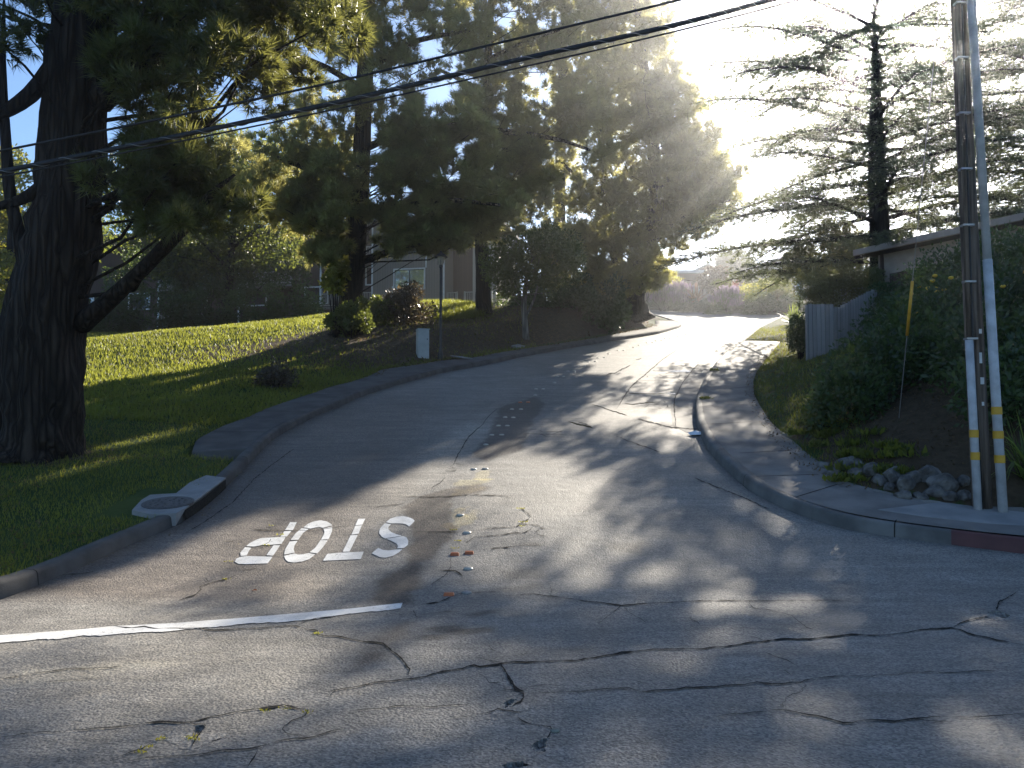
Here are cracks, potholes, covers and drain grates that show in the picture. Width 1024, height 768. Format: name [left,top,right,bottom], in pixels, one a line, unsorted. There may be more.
crack [118,559,1024,738]
manhole cover [141,496,194,509]
crack [1,666,120,682]
drain grate [132,475,226,526]
crack [3,704,350,766]
crack [606,349,698,429]
